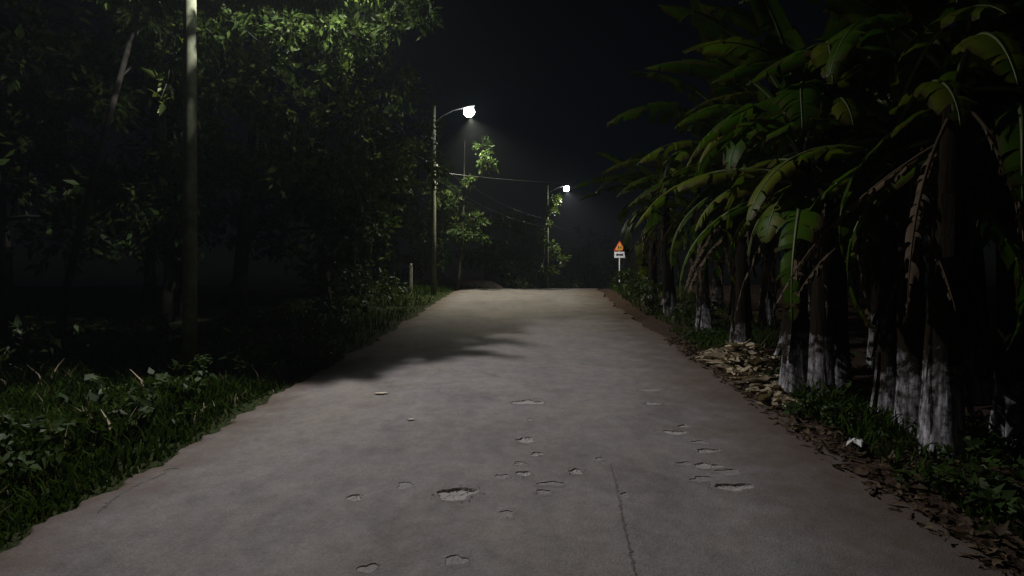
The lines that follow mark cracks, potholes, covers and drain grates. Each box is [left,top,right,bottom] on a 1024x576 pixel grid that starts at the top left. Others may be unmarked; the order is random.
pothole [564,467,586,476]
pothole [431,485,485,503]
pothole [491,473,514,481]
crack [609,463,637,576]
crack [98,467,177,513]
pothole [689,461,728,470]
pothole [512,436,540,444]
pothole [393,480,418,492]
pothole [709,482,760,494]
pothole [350,560,383,576]
pothole [440,552,475,568]
pothole [495,508,517,521]
